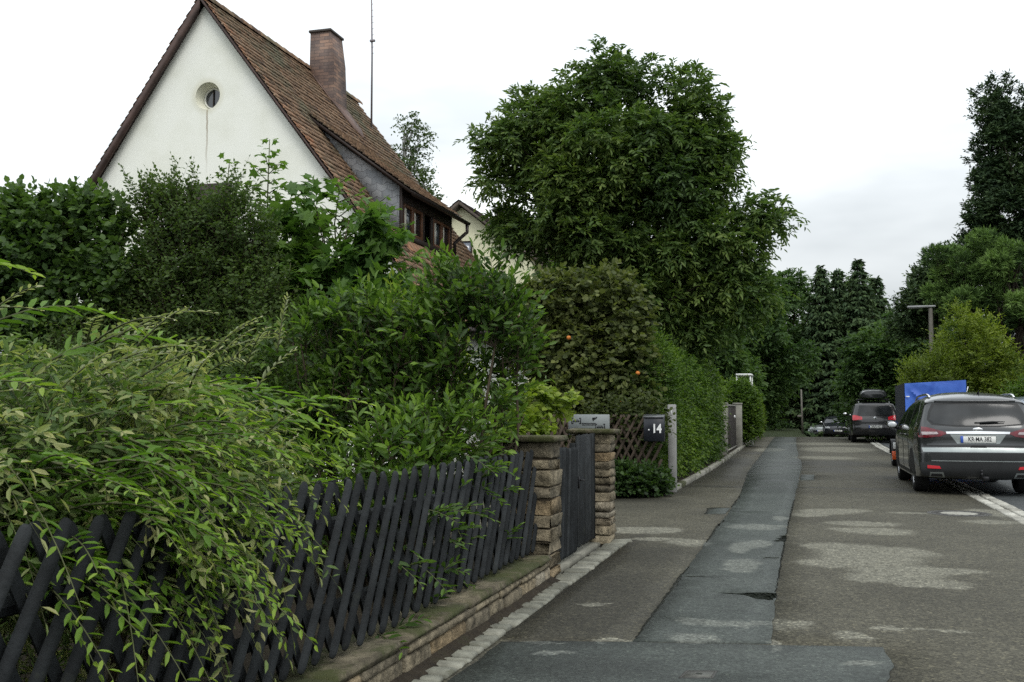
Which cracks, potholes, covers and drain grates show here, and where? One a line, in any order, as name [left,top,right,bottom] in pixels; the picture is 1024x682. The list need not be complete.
pothole [725,592,777,600]
utility cover [679,670,717,678]
